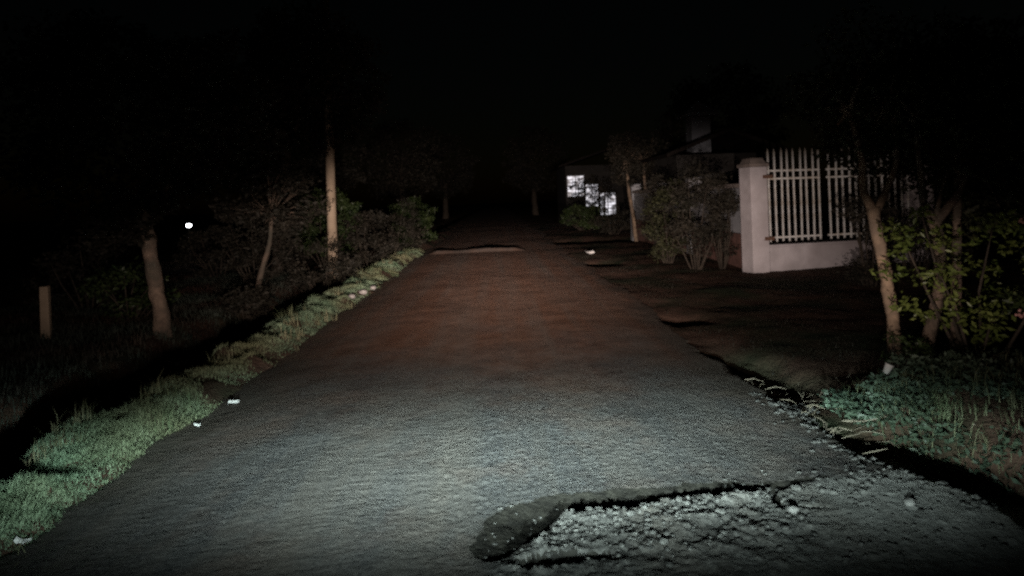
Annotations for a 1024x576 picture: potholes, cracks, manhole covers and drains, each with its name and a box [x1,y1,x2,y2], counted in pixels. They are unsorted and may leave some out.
crack [768,489,835,510]
pothole [511,549,614,570]
pothole [469,475,827,562]
